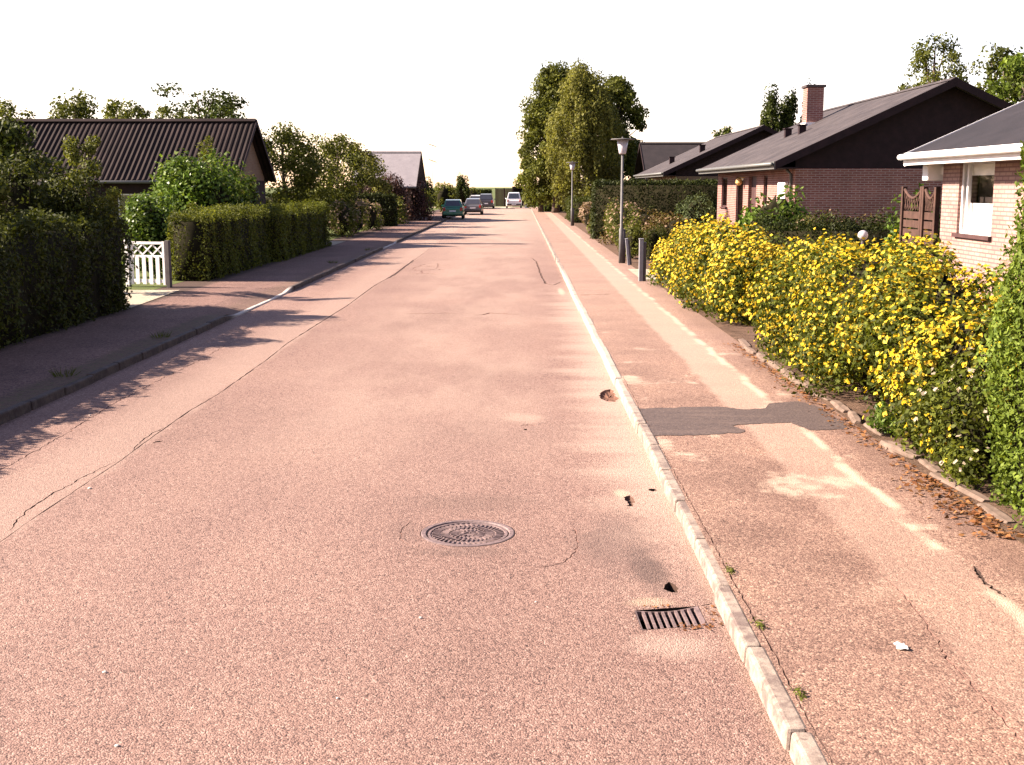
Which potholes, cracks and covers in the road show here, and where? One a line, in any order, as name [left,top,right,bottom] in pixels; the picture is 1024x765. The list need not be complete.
crack [2,238,445,541]
crack [524,529,579,568]
drain grate [634,606,707,630]
pothole [663,582,679,593]
crack [974,566,1006,597]
pothole [599,389,619,402]
manhole cover [421,520,515,547]
